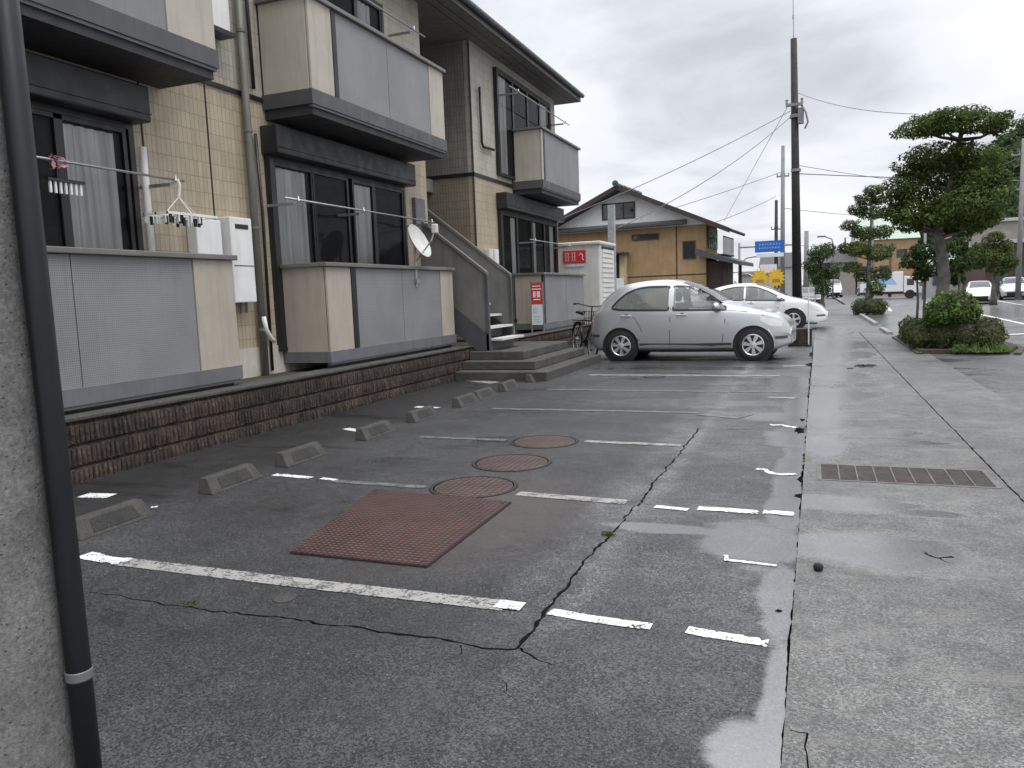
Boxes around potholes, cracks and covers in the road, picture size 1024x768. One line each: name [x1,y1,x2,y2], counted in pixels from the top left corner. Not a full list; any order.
manhole cover [430,476,518,498]
drain grate [817,463,1002,489]
crack [89,430,787,665]
manhole cover [510,435,579,449]
manhole cover [472,454,552,472]
crack [790,730,809,768]
